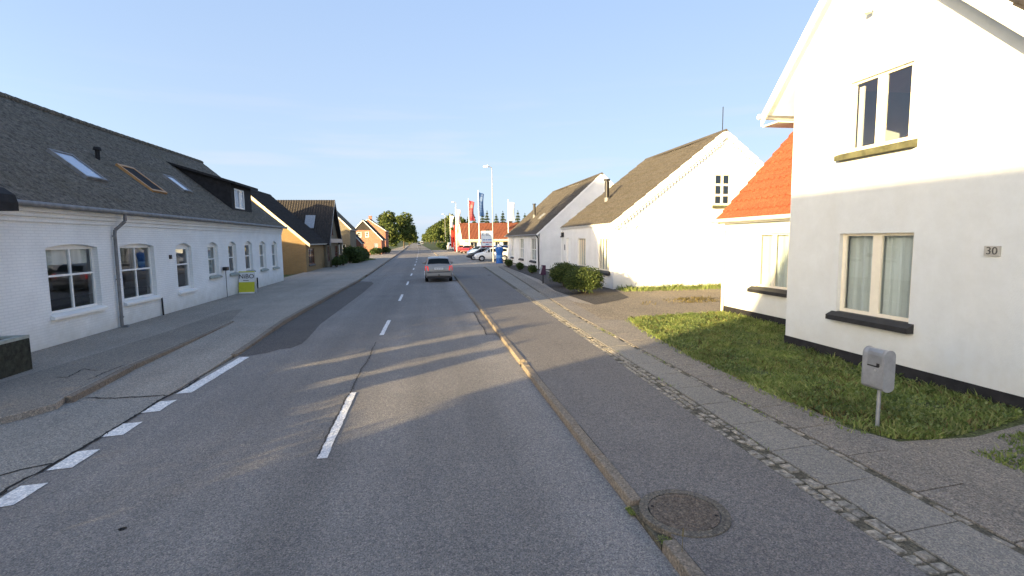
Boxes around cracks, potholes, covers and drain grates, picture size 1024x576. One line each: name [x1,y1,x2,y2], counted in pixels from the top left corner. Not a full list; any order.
manhole cover [639,489,731,538]
